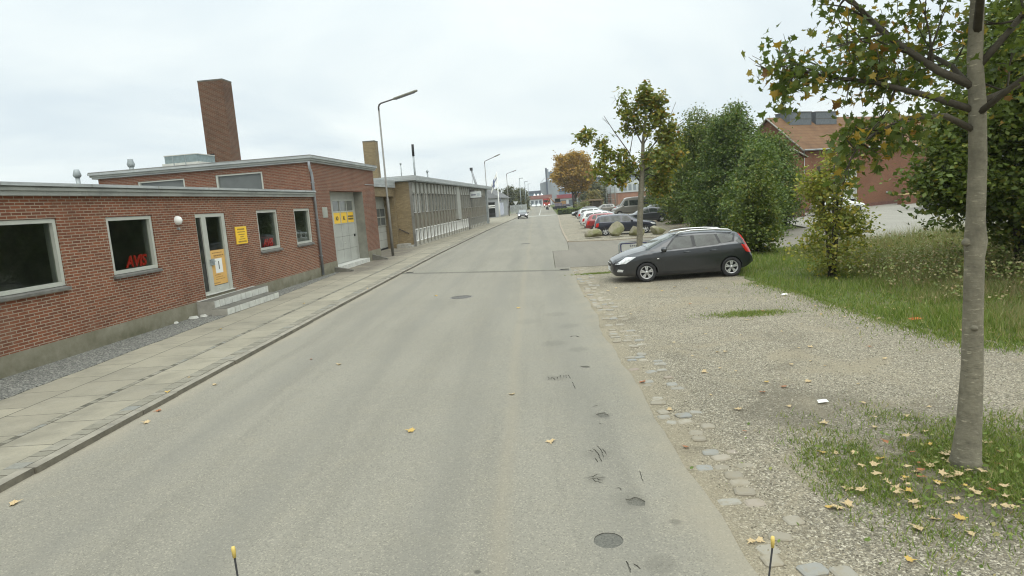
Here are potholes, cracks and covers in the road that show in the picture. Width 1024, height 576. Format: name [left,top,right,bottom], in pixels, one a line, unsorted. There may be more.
pothole [626,497,645,506]
